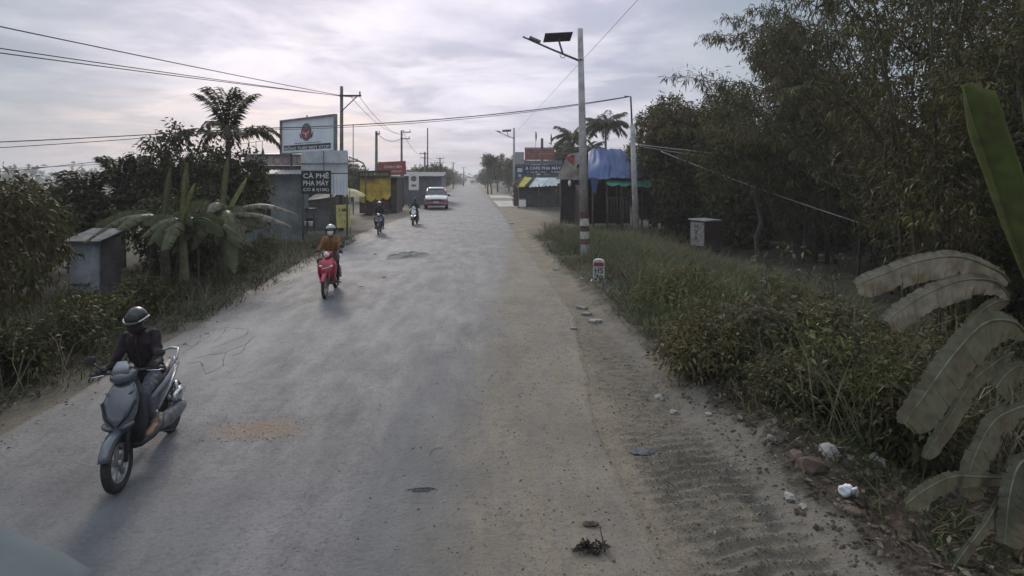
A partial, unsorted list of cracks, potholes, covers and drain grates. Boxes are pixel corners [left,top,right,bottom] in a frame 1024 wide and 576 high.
crack [179,327,255,374]
pothole [379,250,437,261]
